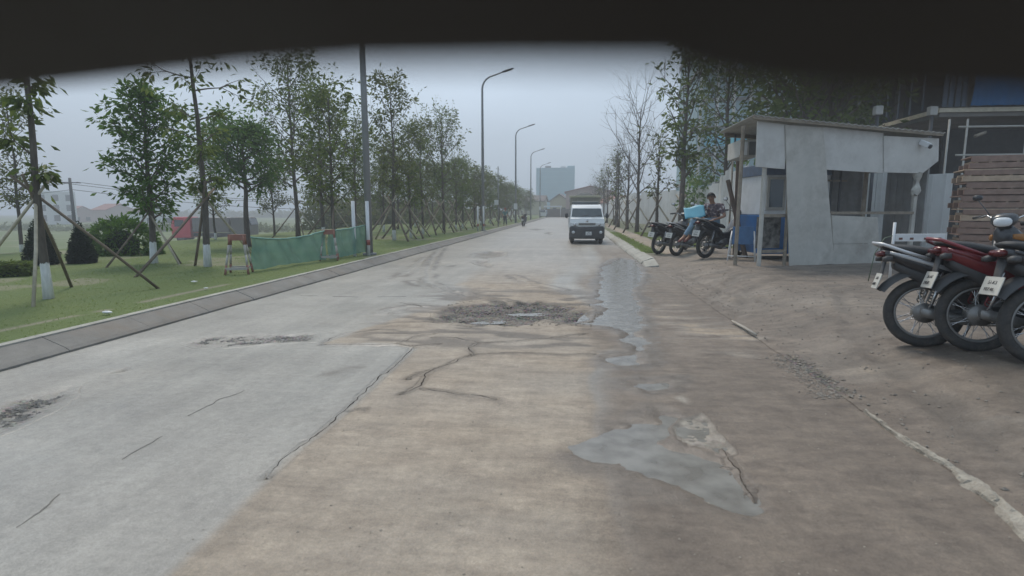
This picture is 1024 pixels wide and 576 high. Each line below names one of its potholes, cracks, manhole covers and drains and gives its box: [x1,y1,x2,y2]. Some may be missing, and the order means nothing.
crack [719,448,758,504]
crack [321,330,596,401]
crack [16,494,60,528]
pothole [0,382,87,437]
pothole [179,332,321,349]
pothole [422,299,598,327]
